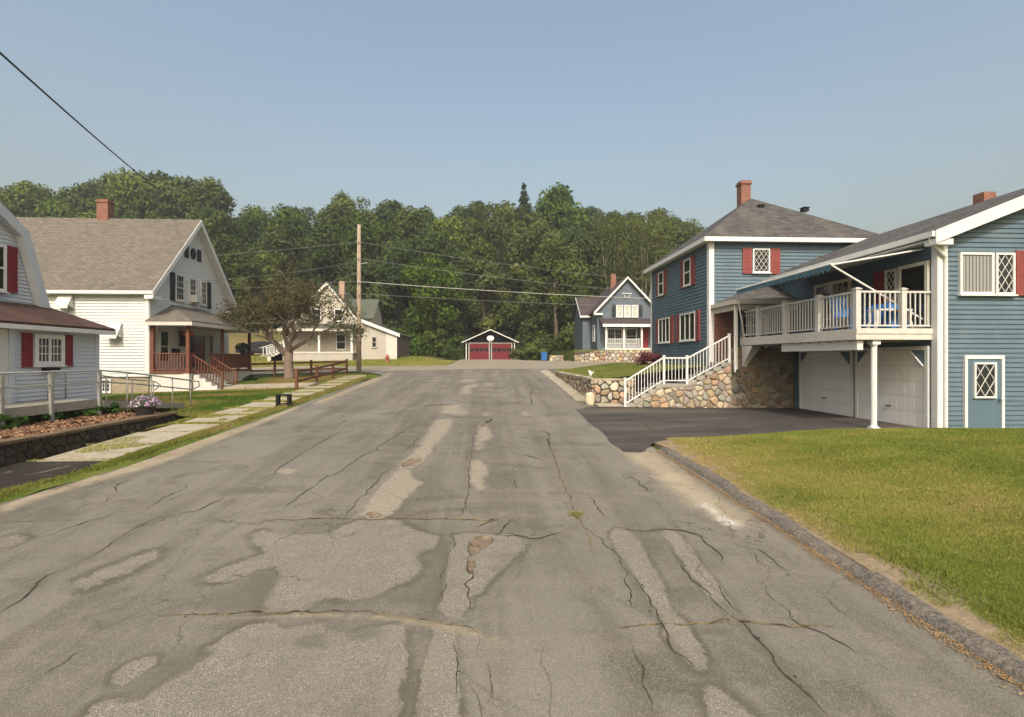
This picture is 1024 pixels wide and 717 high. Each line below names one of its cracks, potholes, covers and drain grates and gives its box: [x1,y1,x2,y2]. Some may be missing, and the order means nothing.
crack [47,481,222,556]
crack [286,393,512,517]
pothole [399,457,424,469]
pothole [462,533,498,558]
pothole [364,511,385,519]
pothole [462,558,480,576]
crack [475,431,879,712]
crack [157,539,498,693]
crack [2,557,71,611]
